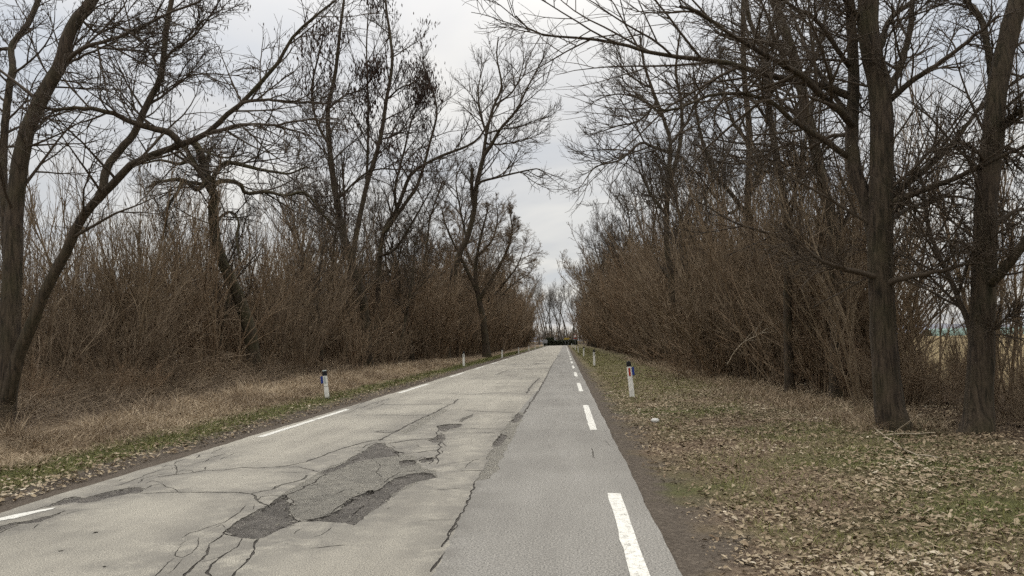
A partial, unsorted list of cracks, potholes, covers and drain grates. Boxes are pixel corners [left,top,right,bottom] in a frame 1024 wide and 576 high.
crack [115,360,550,576]
pothole [436,424,462,432]
pothole [282,454,437,526]
pothole [477,412,523,480]
pothole [46,487,145,507]
pothole [321,443,400,474]
